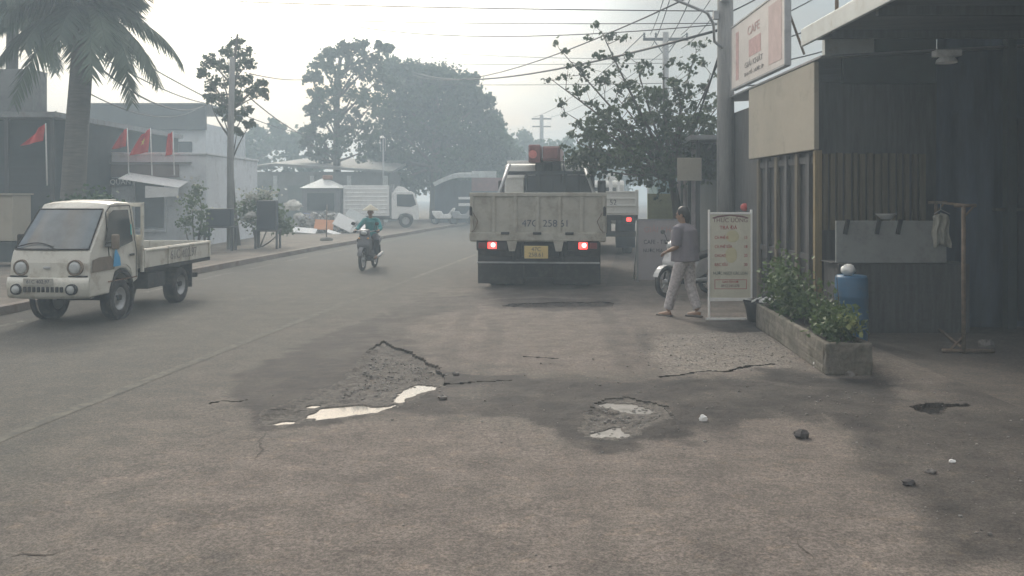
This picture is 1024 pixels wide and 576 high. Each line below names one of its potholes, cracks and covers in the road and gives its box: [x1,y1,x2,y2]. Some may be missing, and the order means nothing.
pothole [577,396,675,441]
crack [658,363,775,378]
pothole [909,402,972,415]
pothole [258,340,448,429]
